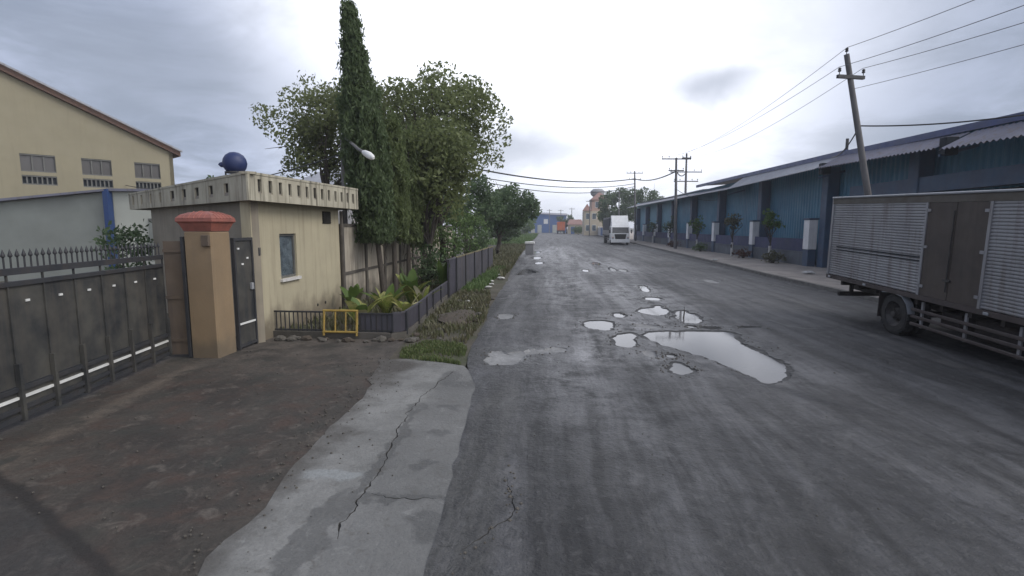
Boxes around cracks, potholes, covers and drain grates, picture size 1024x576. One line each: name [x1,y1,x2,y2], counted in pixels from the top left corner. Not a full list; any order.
pothole [580,320,616,330]
pothole [635,305,674,316]
crack [462,480,515,550]
crack [337,371,455,539]
pothole [669,310,704,324]
pothole [608,332,641,348]
pothole [639,329,795,384]
